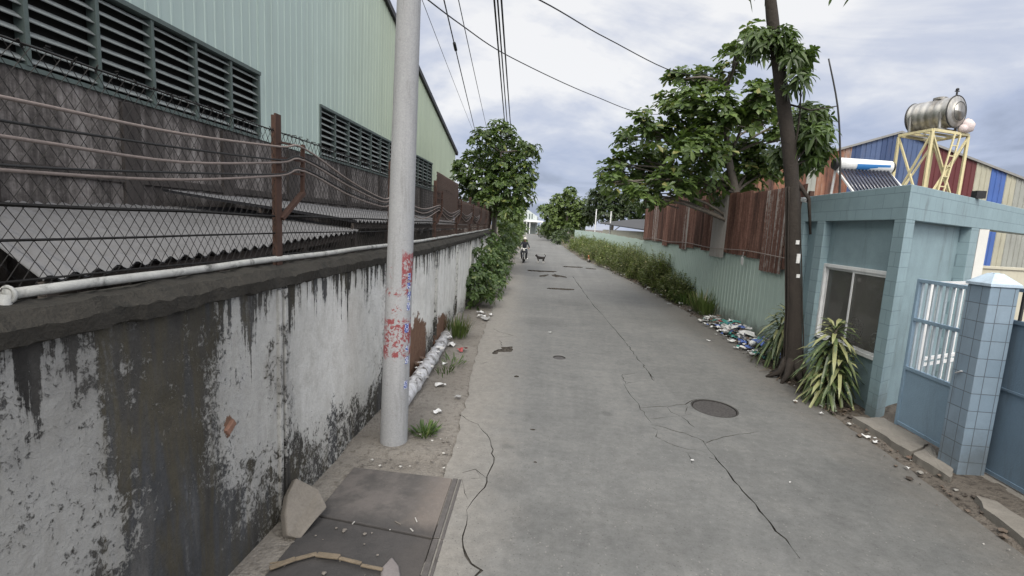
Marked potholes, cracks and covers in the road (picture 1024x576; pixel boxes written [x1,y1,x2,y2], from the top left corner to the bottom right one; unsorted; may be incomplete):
manhole cover [691,399,739,418]
crack [644,399,739,427]
crack [459,414,495,576]
